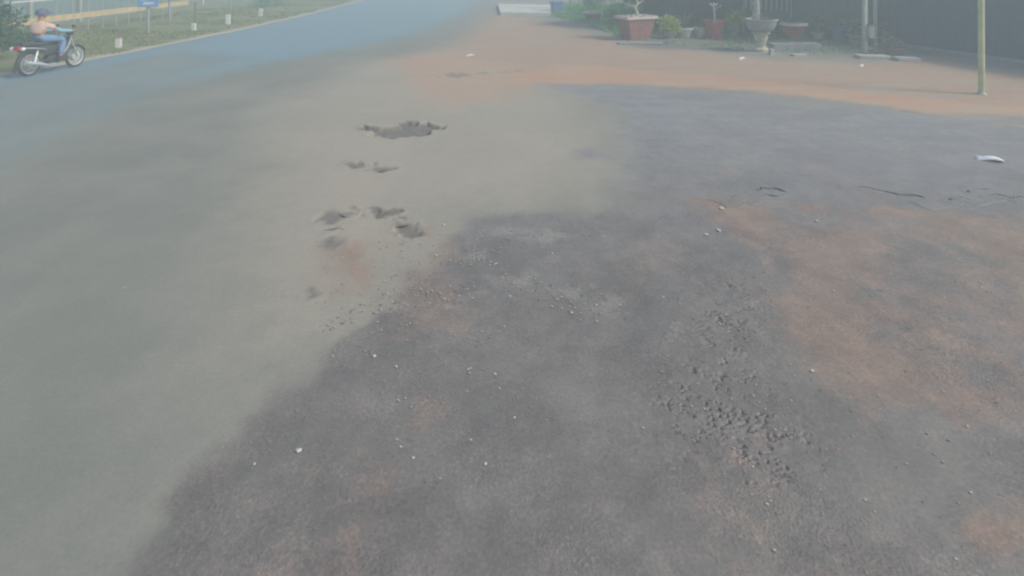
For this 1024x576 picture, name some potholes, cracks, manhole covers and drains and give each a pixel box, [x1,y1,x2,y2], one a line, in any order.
pothole [346,118,456,143]
pothole [339,200,420,227]
pothole [329,156,386,173]
pothole [293,228,366,261]
pothole [356,161,412,178]
crack [707,184,809,208]
pothole [294,203,379,237]
pothole [427,68,534,80]
pothole [377,212,446,249]
crack [835,181,1024,211]
